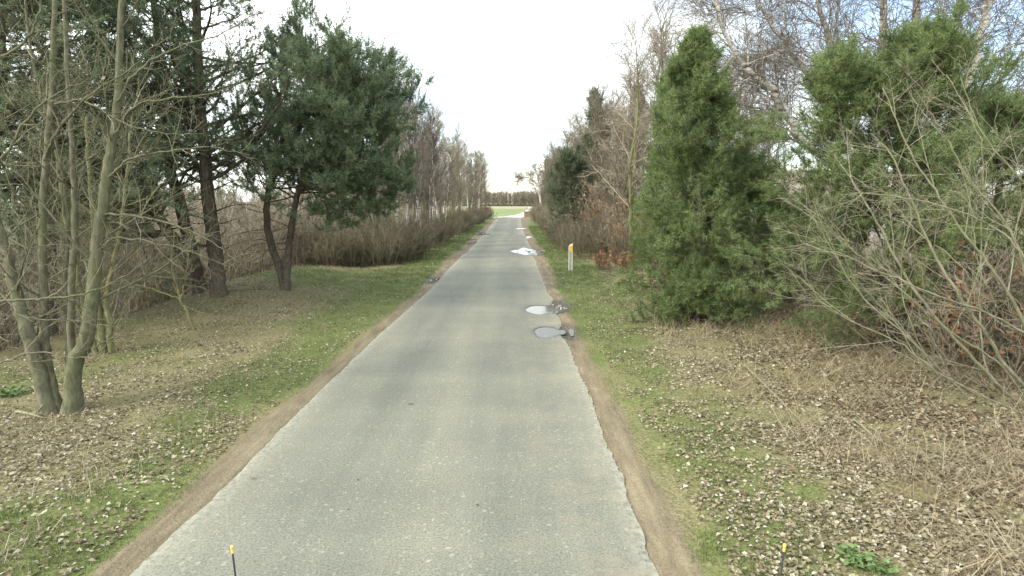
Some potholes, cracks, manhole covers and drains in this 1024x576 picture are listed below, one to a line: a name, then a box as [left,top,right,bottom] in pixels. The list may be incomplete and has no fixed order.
pothole [525,300,570,314]
pothole [534,325,577,340]
